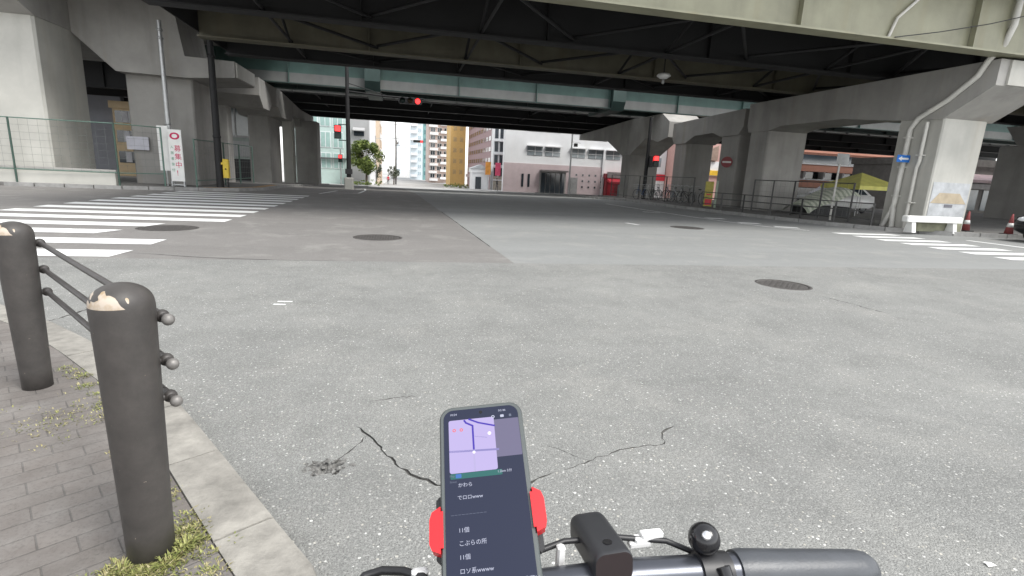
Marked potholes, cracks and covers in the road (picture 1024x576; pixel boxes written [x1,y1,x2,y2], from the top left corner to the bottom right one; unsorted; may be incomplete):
manhole cover [755,279,813,290]
crack [336,426,673,486]
pothole [301,458,356,477]
